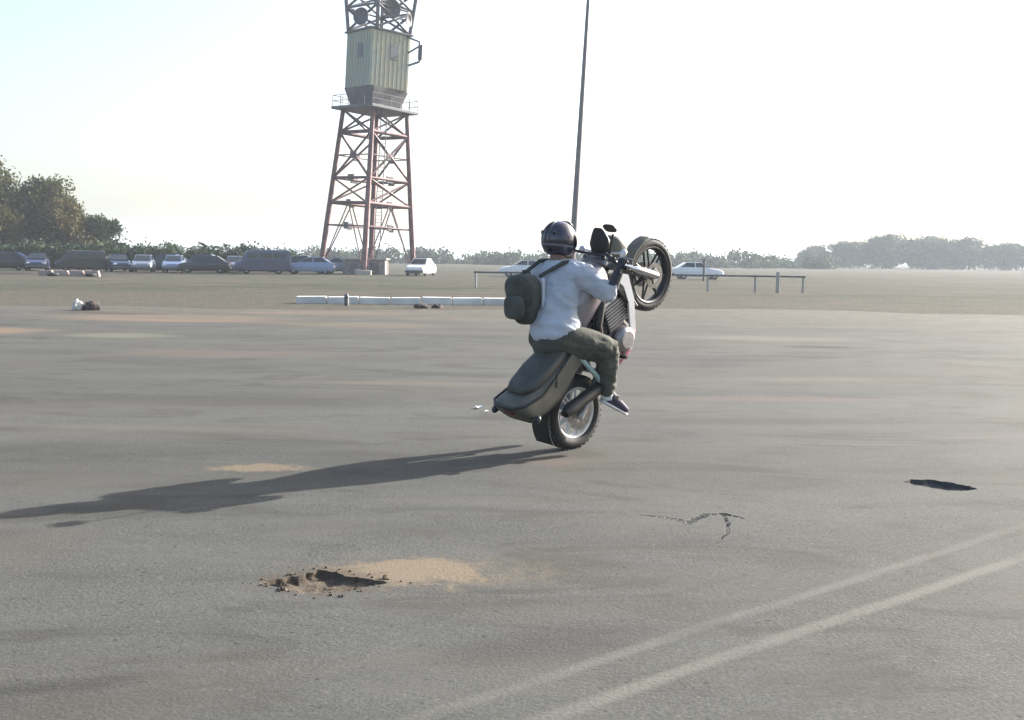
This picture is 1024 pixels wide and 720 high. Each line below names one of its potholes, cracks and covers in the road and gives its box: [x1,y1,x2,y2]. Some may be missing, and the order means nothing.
crack [645,513,745,544]
pothole [242,565,412,599]
pothole [903,479,976,491]
